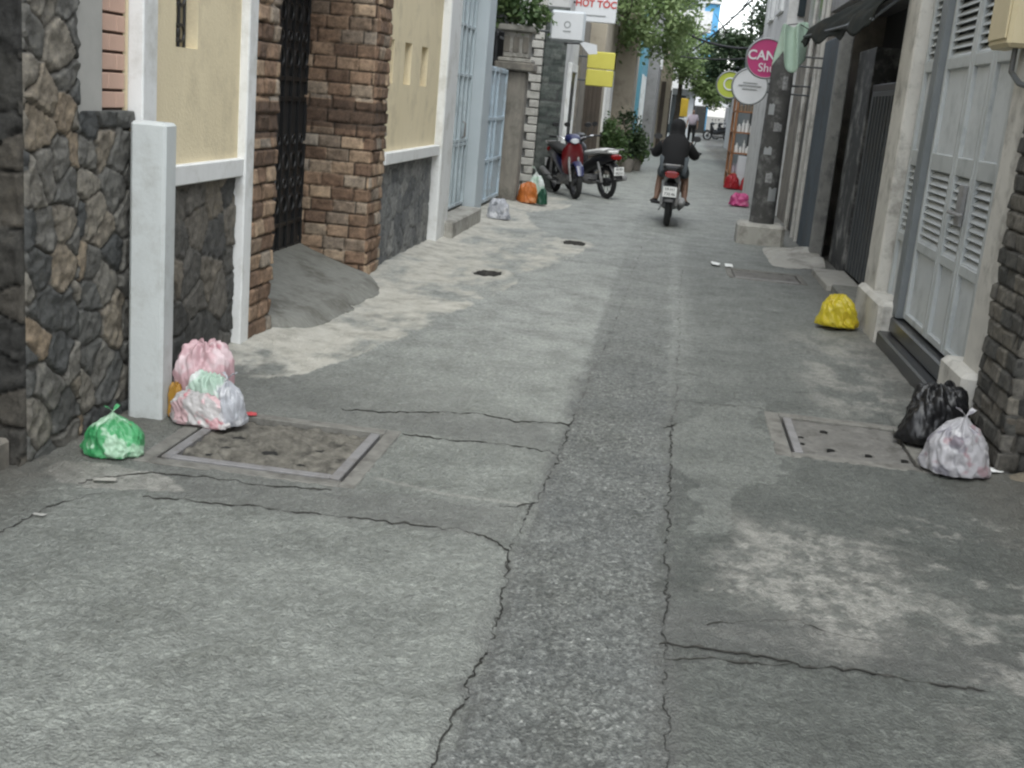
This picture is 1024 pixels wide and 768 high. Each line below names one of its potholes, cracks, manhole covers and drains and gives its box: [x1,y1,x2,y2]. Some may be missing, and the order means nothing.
crack [0,472,511,768]
crack [402,433,556,455]
manhole cover [764,411,940,476]
manhole cover [133,414,401,489]
crack [342,409,569,426]
crack [659,619,992,768]
manhole cover [725,267,809,286]
